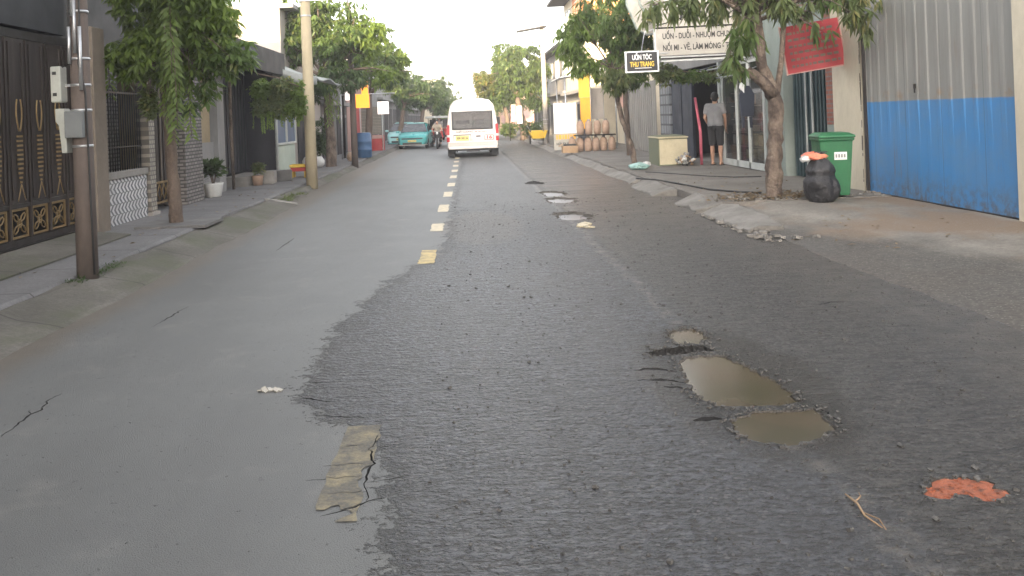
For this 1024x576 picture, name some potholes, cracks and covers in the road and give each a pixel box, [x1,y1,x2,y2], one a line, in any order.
pothole [543,196,578,204]
crack [1,393,62,437]
pothole [547,210,599,220]
pothole [663,325,713,346]
crack [307,436,409,516]
pothole [719,405,847,450]
pothole [667,351,808,411]
